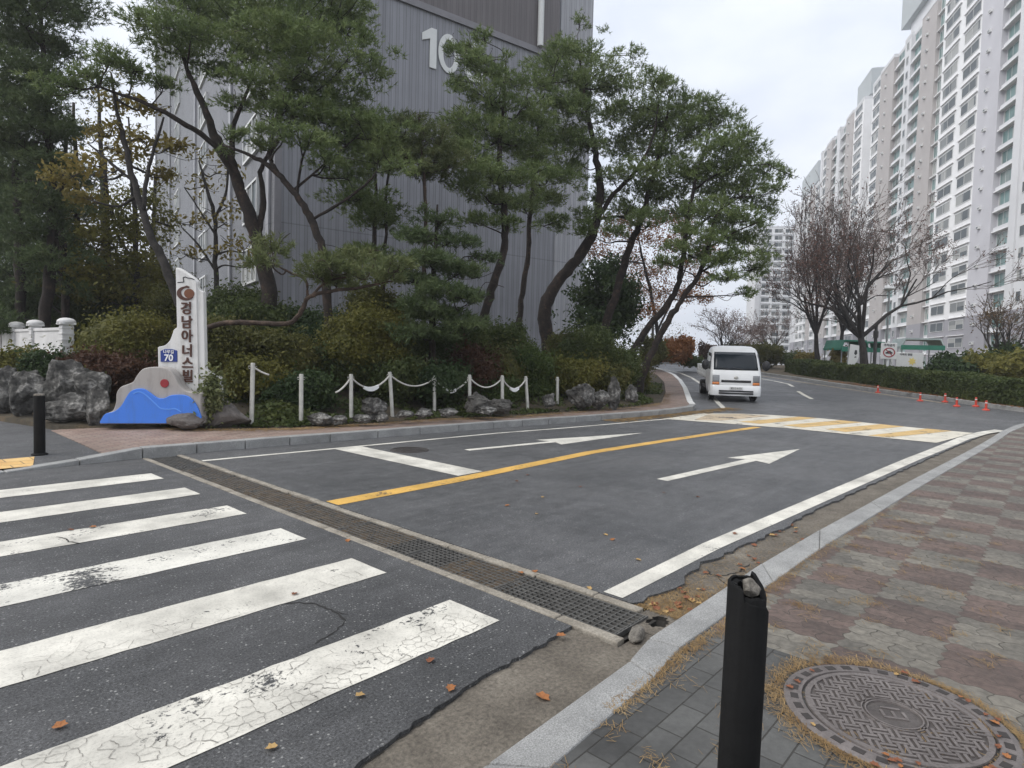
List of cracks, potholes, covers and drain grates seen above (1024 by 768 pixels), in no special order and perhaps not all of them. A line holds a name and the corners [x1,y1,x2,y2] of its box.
crack [291,602,346,644]
manhole cover [784,665,1024,768]
